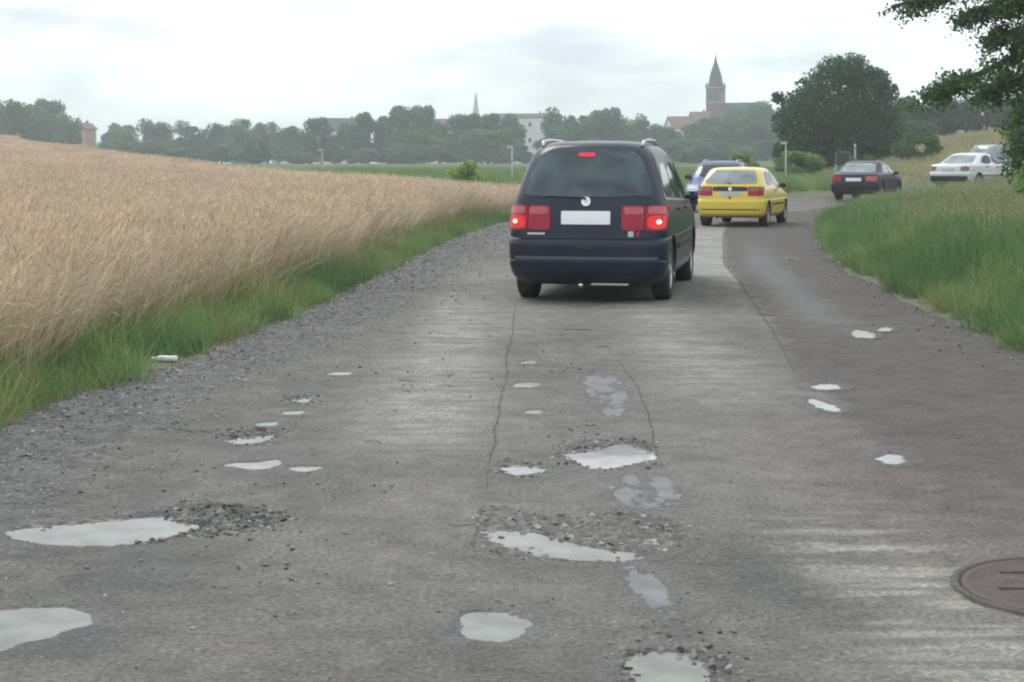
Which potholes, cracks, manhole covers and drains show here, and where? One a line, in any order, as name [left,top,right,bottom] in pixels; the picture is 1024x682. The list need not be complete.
crack [627,373,666,469]
pothole [839,328,887,339]
pothole [0,499,306,553]
pothole [789,395,859,414]
pothole [0,598,125,659]
pothole [478,457,567,481]
pothole [205,456,301,473]
pothole [427,603,558,651]
pothole [460,503,707,568]
pothole [588,471,703,513]
pothole [594,562,708,621]
pothole [568,373,644,420]
